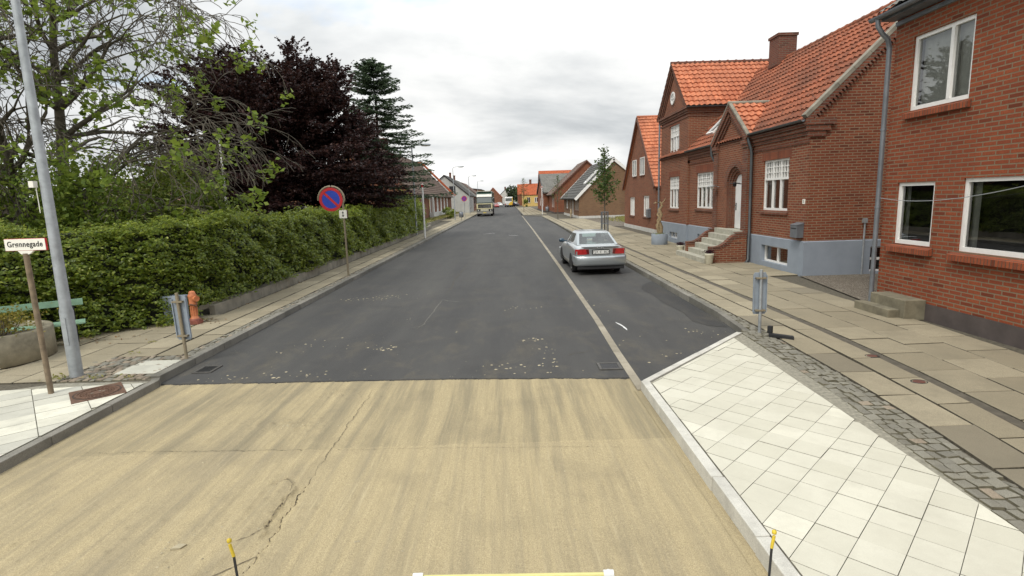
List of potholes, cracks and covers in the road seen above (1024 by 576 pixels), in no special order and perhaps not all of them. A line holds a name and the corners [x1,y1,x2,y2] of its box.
manhole cover [69,382,127,404]
drain grate [192,365,223,374]
drain grate [596,362,623,370]
